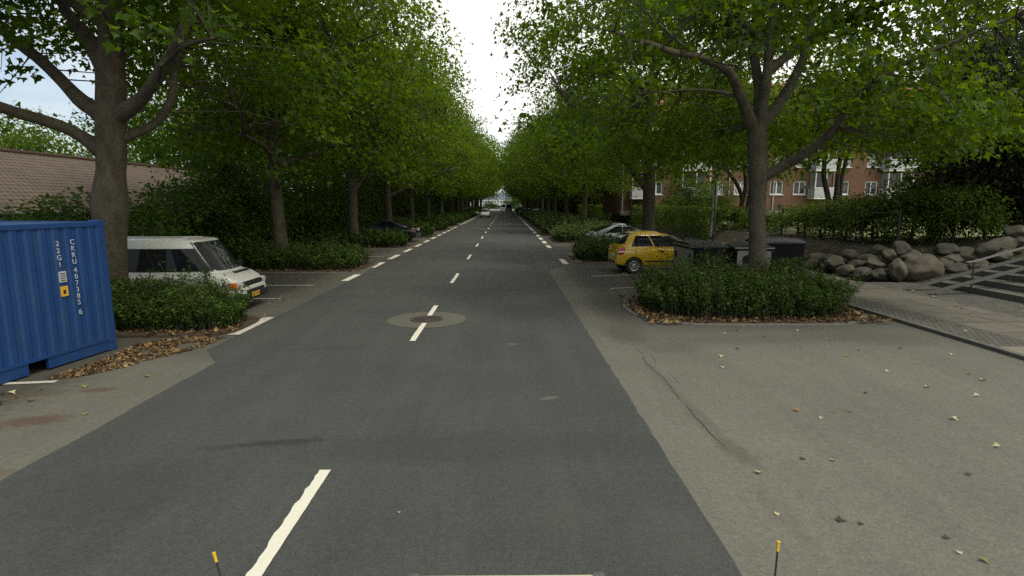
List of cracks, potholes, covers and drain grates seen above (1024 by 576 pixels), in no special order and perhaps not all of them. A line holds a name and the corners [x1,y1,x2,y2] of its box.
crack [635,348,721,443]
manhole cover [410,315,444,323]
